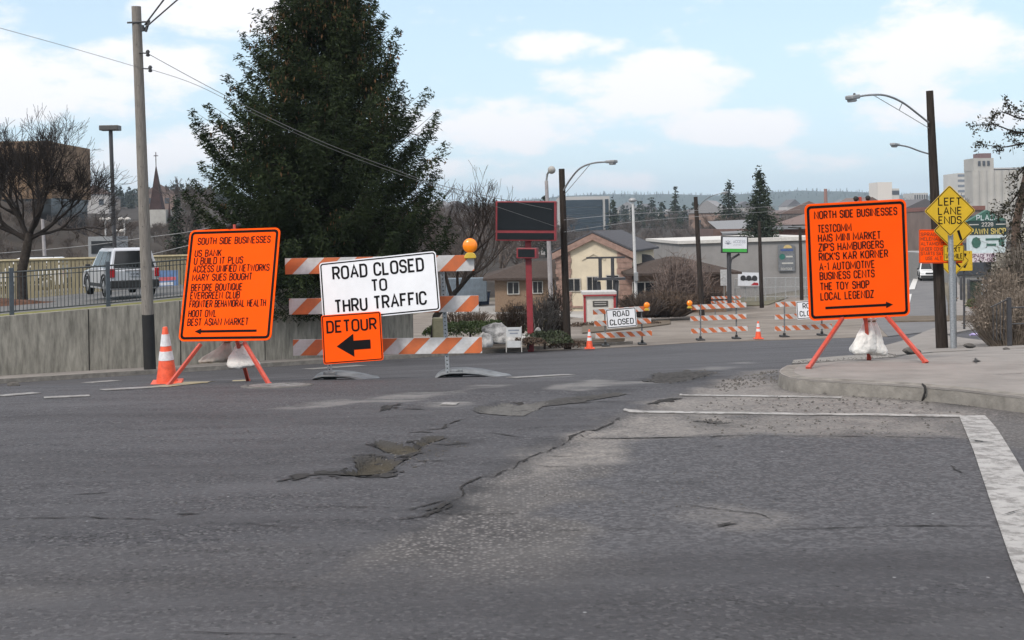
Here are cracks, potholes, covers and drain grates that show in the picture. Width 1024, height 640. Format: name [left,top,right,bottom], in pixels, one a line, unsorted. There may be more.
crack [277,401,620,520]
crack [689,498,778,526]
pothole [339,455,407,476]
pothole [474,401,549,416]
pothole [374,436,447,455]
